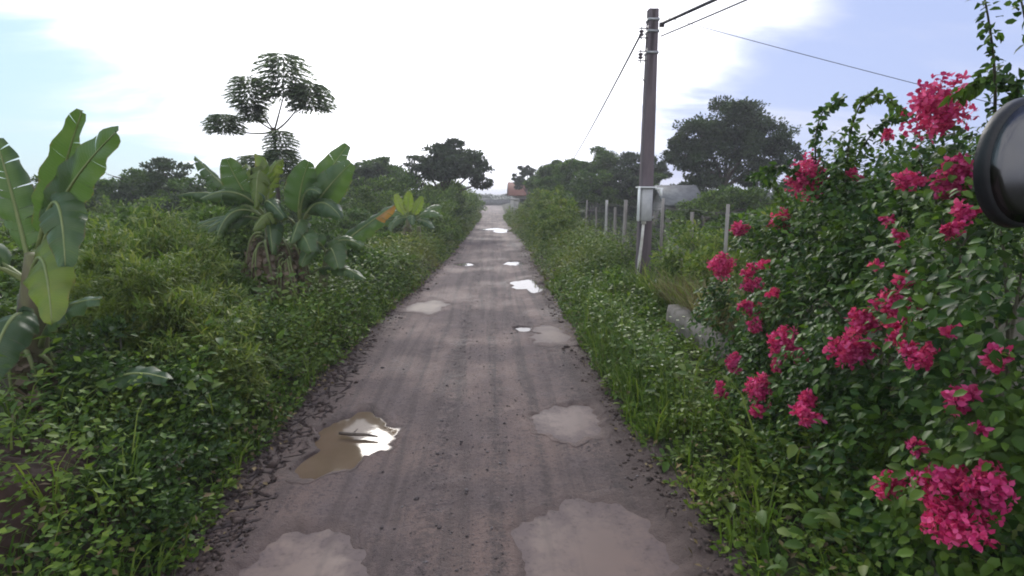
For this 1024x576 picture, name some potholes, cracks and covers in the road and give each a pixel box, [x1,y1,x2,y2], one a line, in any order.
pothole [279,402,406,485]
pothole [507,277,549,294]
